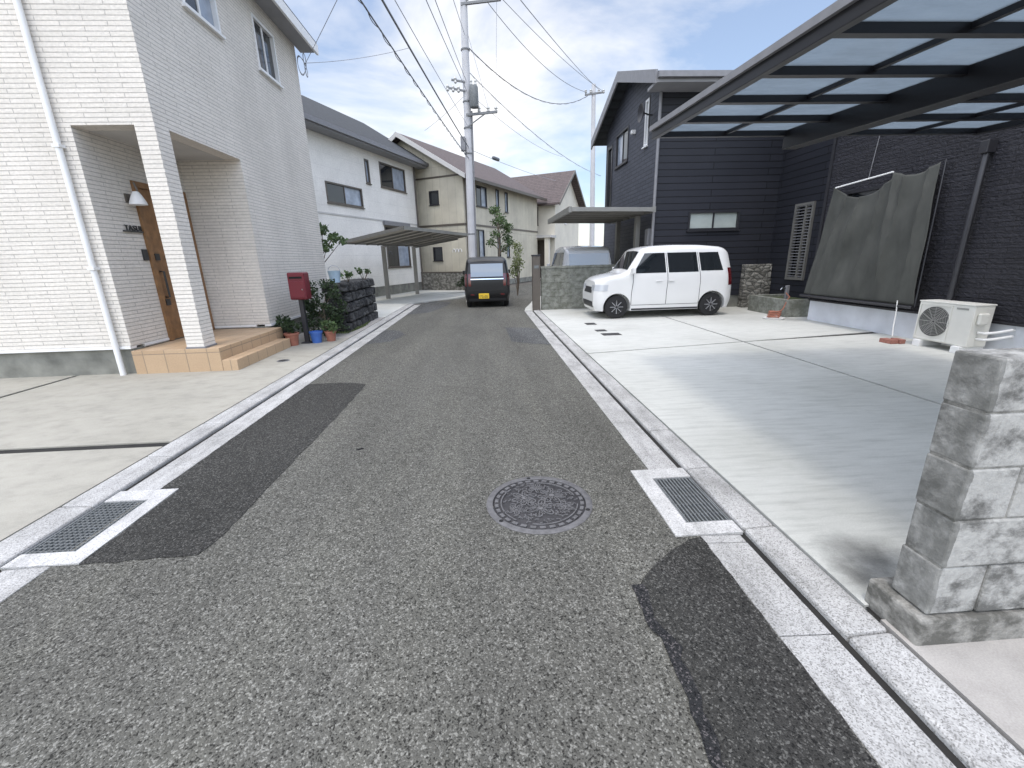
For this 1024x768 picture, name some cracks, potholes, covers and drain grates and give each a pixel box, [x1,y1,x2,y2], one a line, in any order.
drain grate [0,488,179,571]
drain grate [631,468,743,537]
manhole cover [486,476,593,535]
